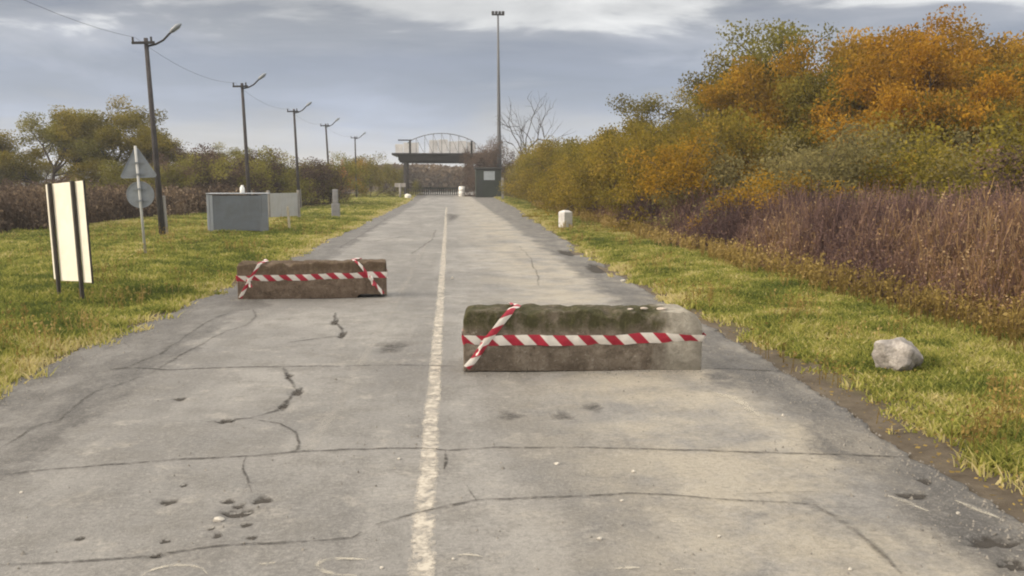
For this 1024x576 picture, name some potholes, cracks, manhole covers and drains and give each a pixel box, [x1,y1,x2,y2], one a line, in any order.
pothole [972,537,1020,549]
crack [377,492,816,524]
crack [19,310,881,473]
